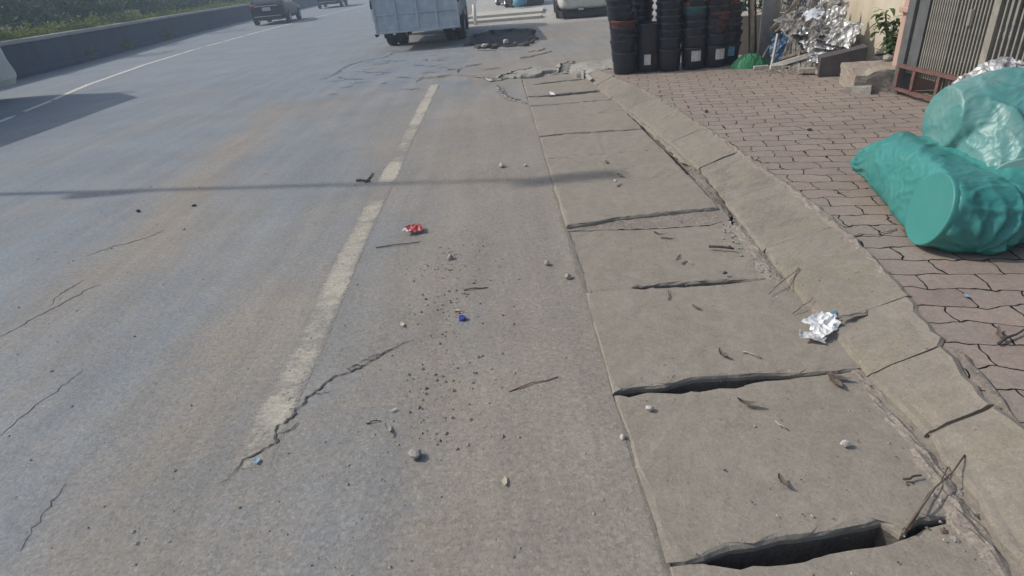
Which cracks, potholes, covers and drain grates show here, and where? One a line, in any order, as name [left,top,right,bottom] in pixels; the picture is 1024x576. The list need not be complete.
crack [320,48,575,103]
pothole [465,28,541,50]
crack [219,340,412,484]
